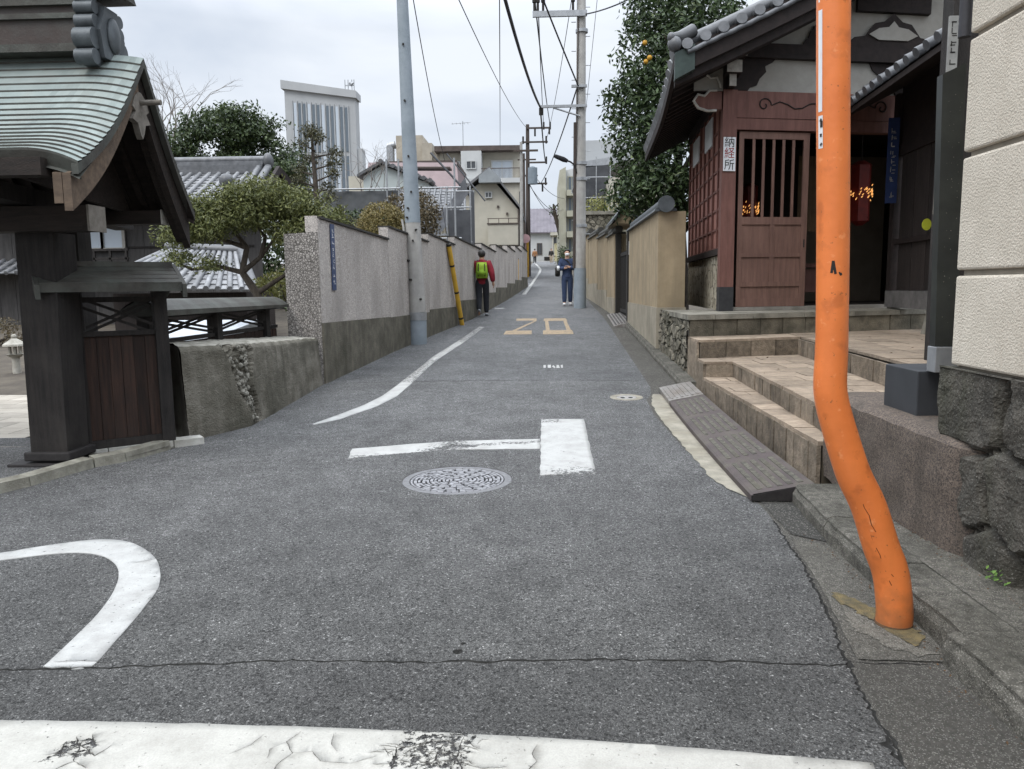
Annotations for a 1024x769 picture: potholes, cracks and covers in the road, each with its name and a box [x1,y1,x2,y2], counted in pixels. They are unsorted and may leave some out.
crack [0,521,935,769]
manhole cover [402,467,512,495]
